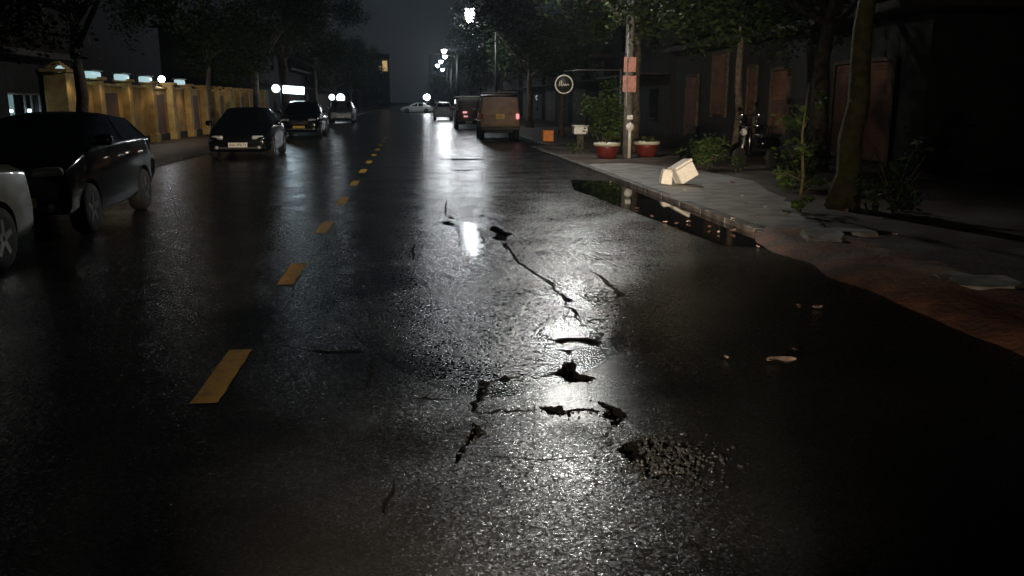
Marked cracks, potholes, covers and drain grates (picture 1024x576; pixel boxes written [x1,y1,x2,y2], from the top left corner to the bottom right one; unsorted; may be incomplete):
crack [382,481,396,516]
pothole [593,432,749,493]
crack [506,245,659,323]
pothole [536,360,599,384]
